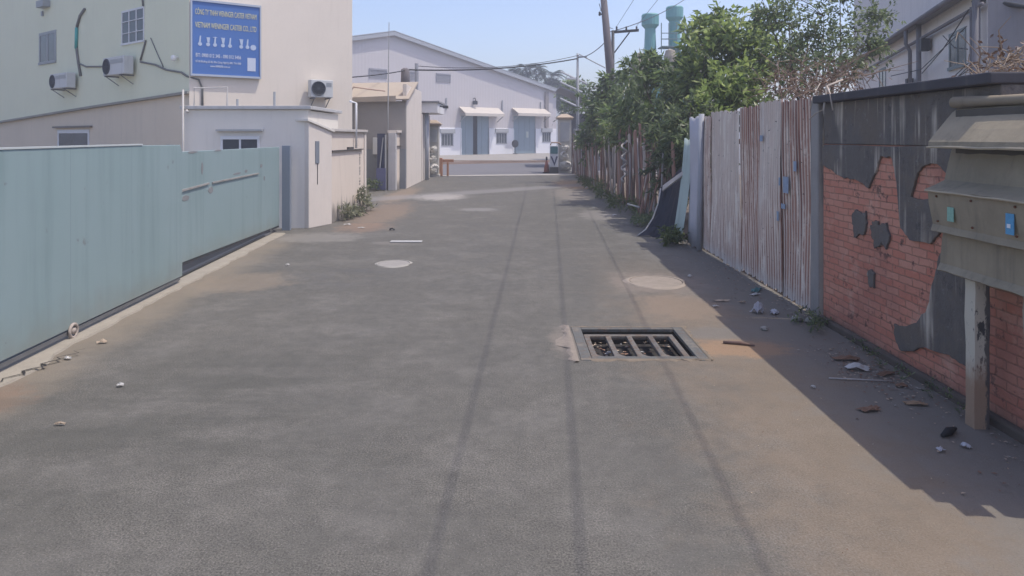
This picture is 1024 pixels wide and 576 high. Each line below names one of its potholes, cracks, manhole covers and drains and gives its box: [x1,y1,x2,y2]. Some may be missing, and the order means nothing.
manhole cover [623,275,686,290]
manhole cover [375,260,413,268]
drain grate [555,325,714,362]
